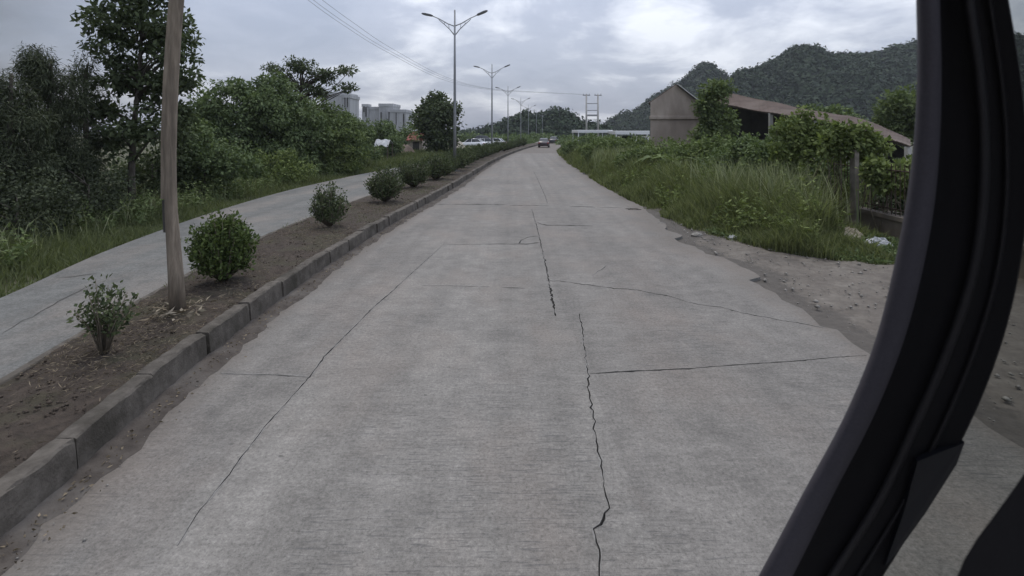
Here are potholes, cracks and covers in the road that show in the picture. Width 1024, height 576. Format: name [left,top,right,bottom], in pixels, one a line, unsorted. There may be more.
crack [531,209,825,328]
crack [579,313,610,576]
